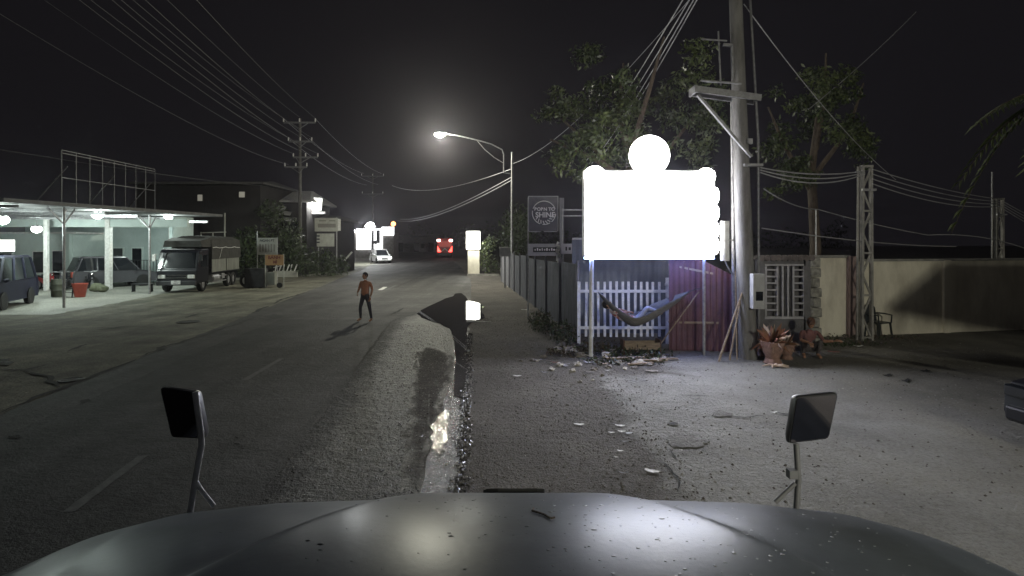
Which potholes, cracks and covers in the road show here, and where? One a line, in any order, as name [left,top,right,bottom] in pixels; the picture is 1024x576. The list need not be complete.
crack [2,292,305,412]
pothole [398,346,454,494]
crack [659,448,681,492]
